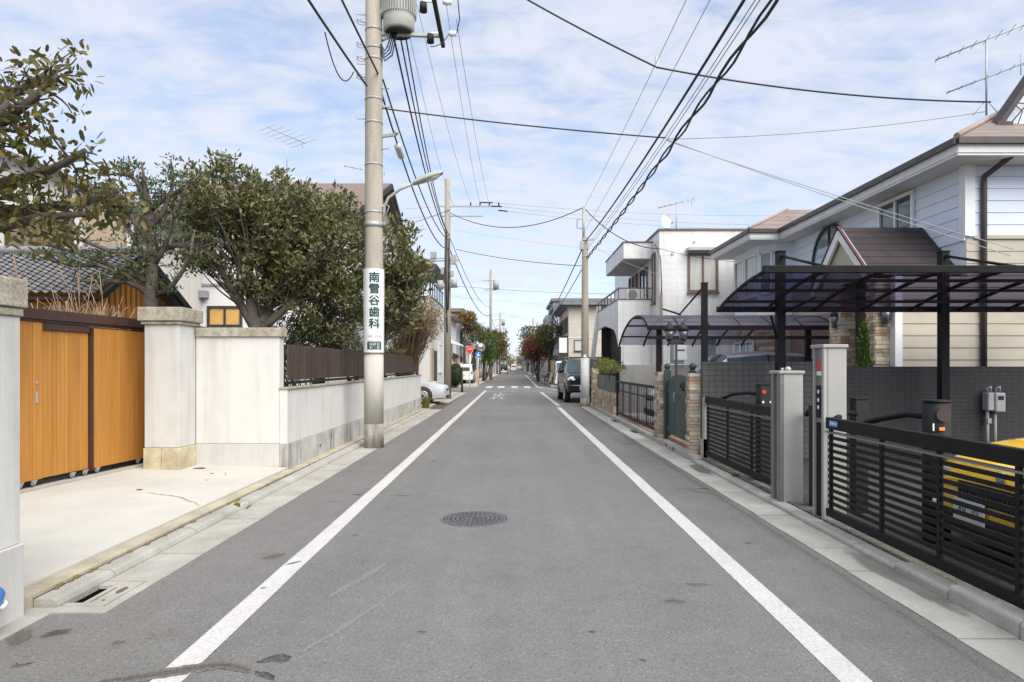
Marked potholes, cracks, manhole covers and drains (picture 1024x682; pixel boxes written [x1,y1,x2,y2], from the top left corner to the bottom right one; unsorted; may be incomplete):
manhole cover [441,511,509,527]
